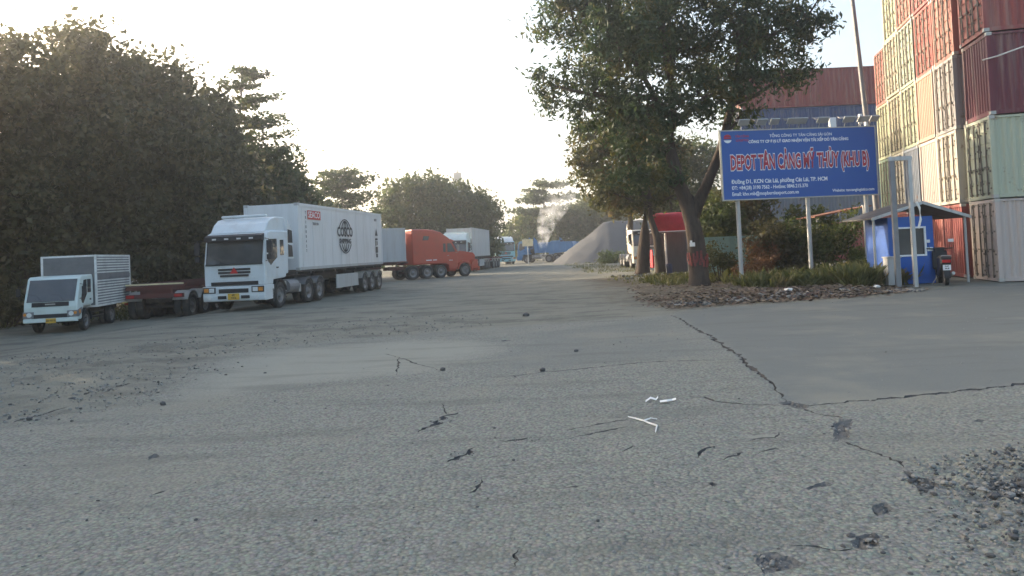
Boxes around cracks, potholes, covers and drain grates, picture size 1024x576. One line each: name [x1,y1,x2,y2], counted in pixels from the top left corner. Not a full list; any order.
pothole [832,417,853,442]
pothole [850,534,881,550]
crack [804,383,1024,418]
crack [697,433,780,460]
pothole [872,502,893,516]
pothole [755,552,803,573]
crack [842,441,904,467]
crack [561,419,633,452]
crack [418,404,458,432]
crack [673,316,787,405]
crack [447,437,535,493]
